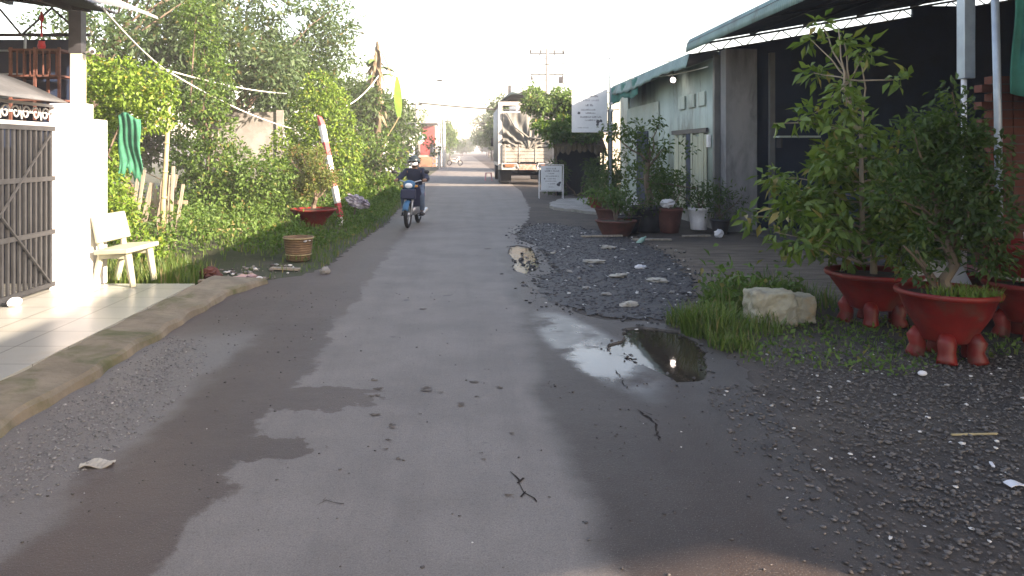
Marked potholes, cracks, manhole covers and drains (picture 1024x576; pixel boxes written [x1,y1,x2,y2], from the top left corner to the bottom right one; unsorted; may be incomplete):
crack [510,471,537,502]
pothole [600,324,715,387]
crack [637,409,661,440]
